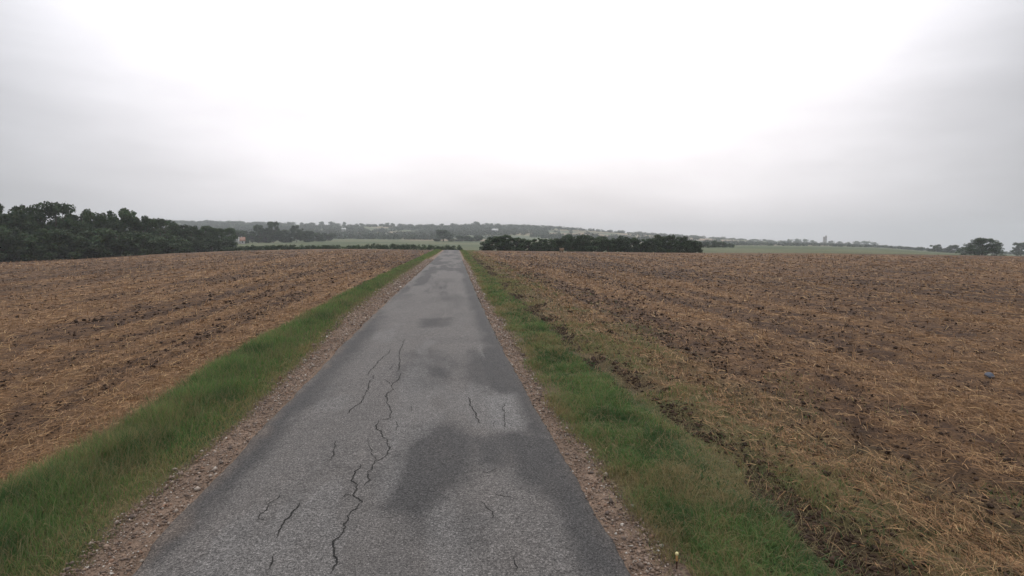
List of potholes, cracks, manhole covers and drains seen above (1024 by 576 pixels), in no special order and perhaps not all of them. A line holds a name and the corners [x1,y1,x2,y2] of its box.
crack [258,495,301,572]
crack [331,344,412,572]
